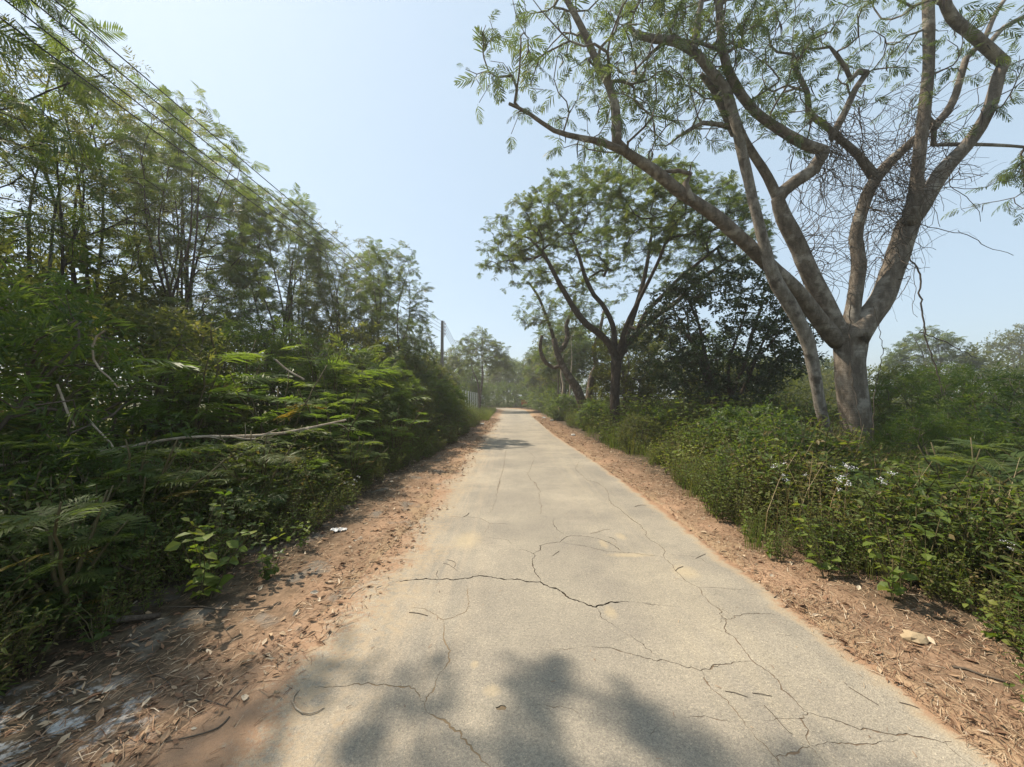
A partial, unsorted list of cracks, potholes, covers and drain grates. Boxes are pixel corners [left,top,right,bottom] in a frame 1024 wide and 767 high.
crack [452,452,542,543]
crack [316,519,664,766]
crack [532,464,972,766]
